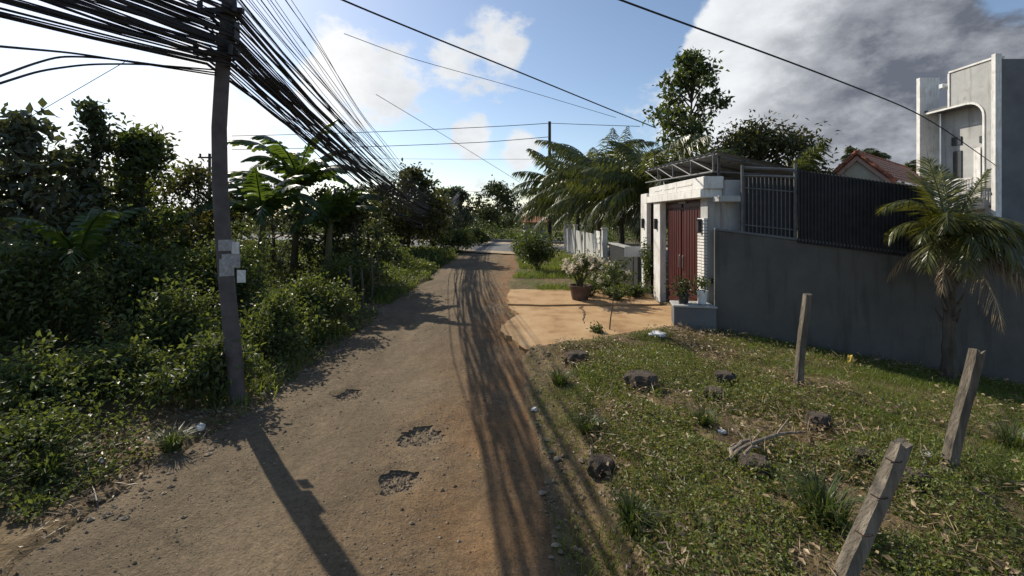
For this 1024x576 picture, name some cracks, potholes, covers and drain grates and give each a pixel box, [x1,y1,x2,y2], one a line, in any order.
pothole [336,389,362,402]
pothole [378,470,422,496]
pothole [396,426,445,448]
